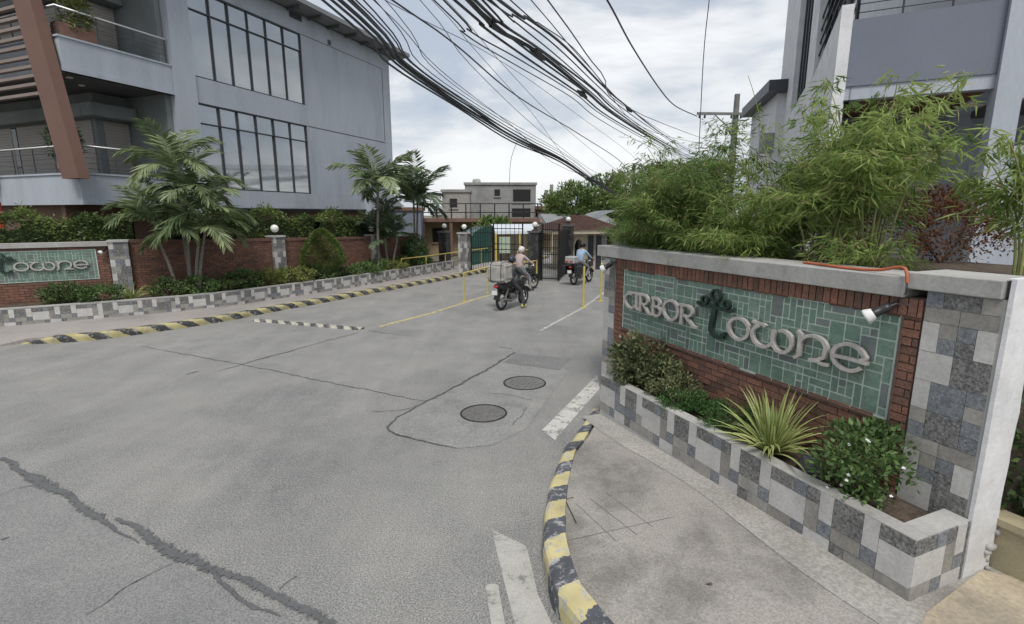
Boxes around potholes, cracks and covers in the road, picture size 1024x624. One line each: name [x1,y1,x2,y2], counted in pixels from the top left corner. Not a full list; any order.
crack [0,457,338,624]
manhole cover [503,376,546,390]
manhole cover [460,404,507,422]
